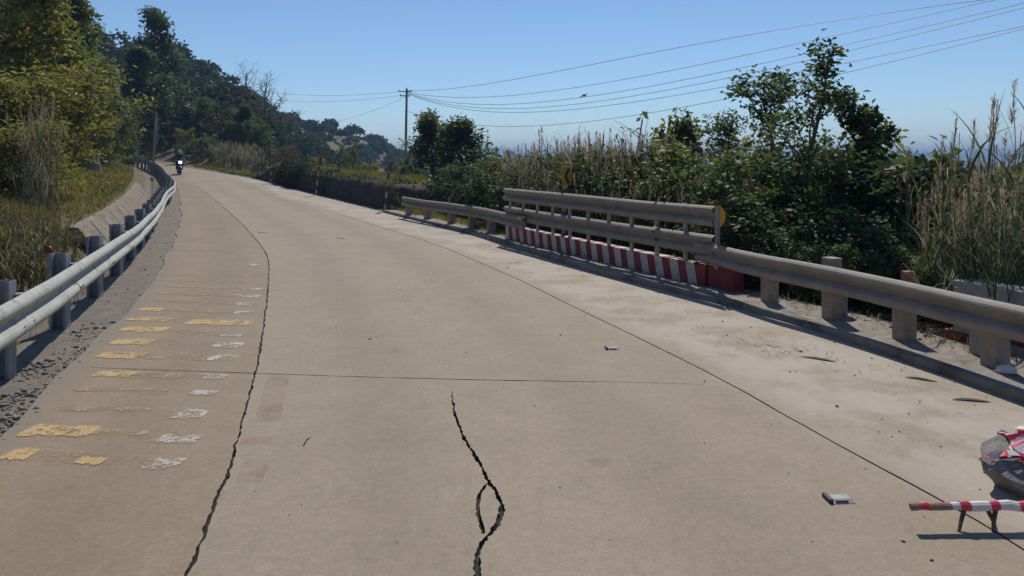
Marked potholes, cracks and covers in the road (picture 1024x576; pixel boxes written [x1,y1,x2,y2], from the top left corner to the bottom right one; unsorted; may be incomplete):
crack [90,185,681,576]
